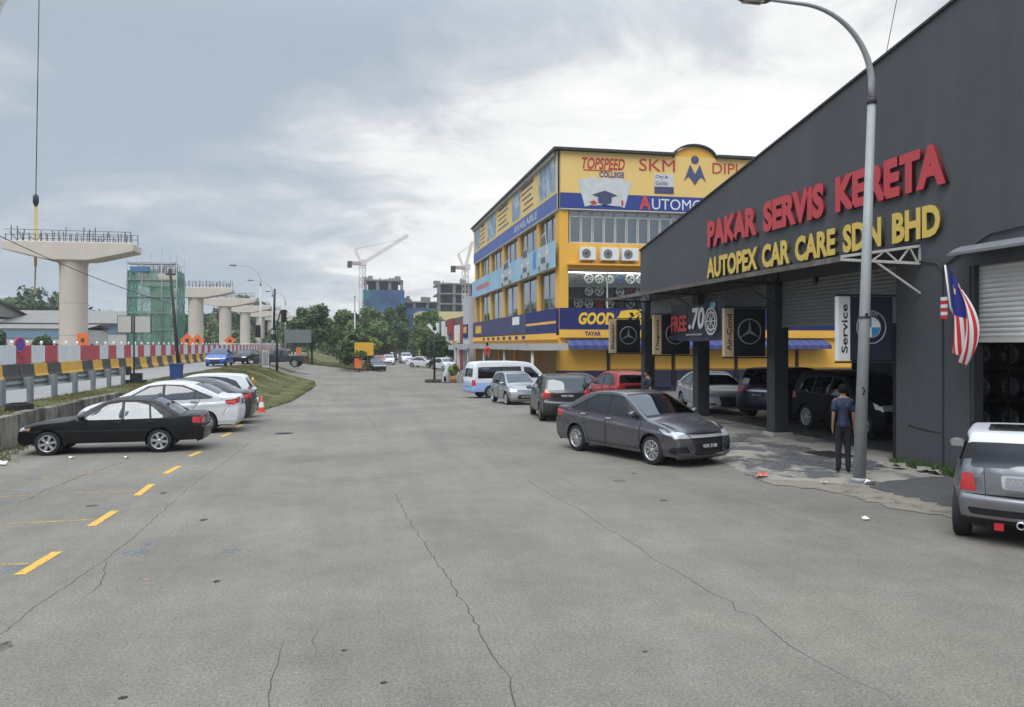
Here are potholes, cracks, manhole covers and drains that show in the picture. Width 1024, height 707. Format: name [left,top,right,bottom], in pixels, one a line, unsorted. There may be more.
crack [2,463,120,504]
crack [523,475,905,706]
crack [268,643,284,707]
crack [396,495,516,707]
